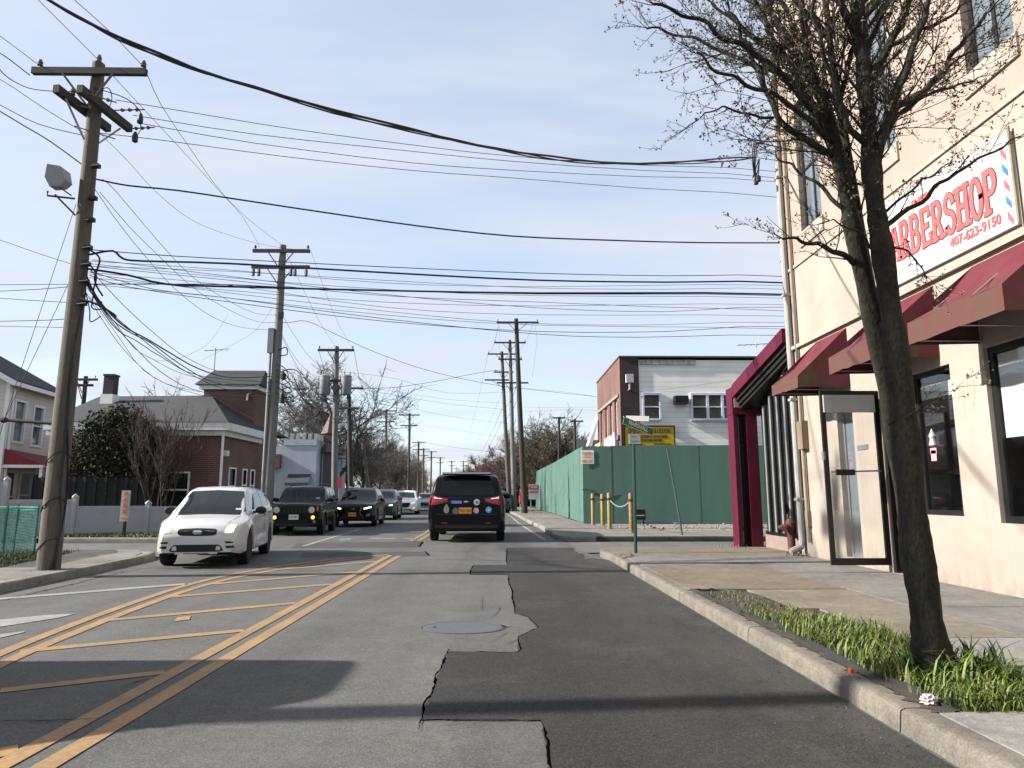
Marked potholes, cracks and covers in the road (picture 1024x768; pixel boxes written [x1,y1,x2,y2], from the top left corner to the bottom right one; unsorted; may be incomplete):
manhole cover [420,621,505,634]
crack [418,559,565,768]
